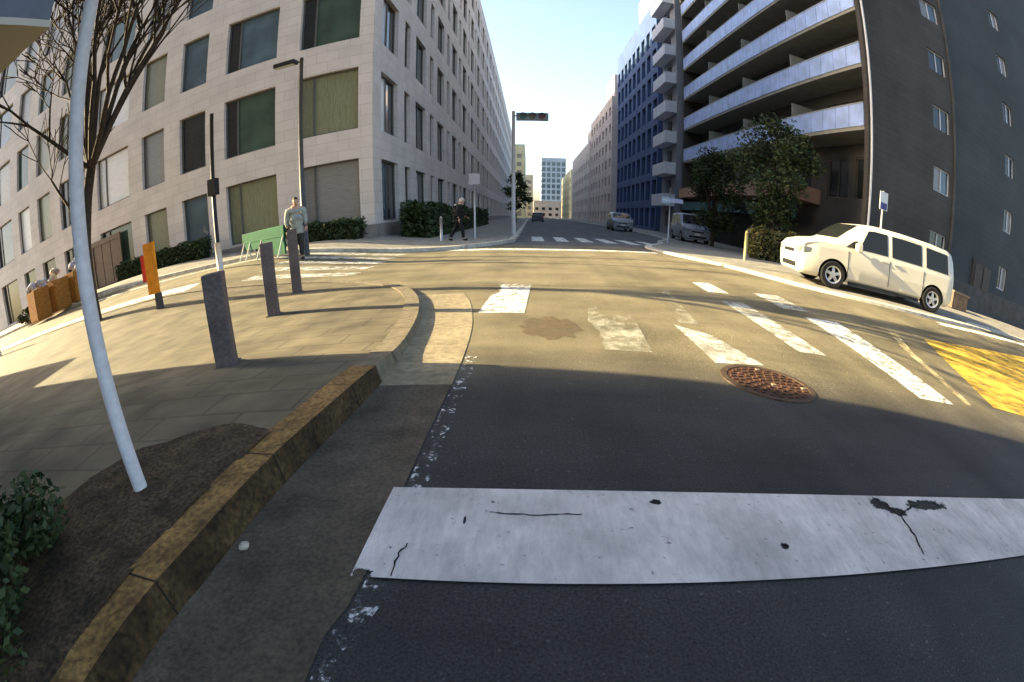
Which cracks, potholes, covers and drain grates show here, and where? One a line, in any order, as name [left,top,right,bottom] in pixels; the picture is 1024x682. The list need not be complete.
manhole cover [720,365,816,404]
crack [390,543,408,576]
crack [876,502,924,554]
